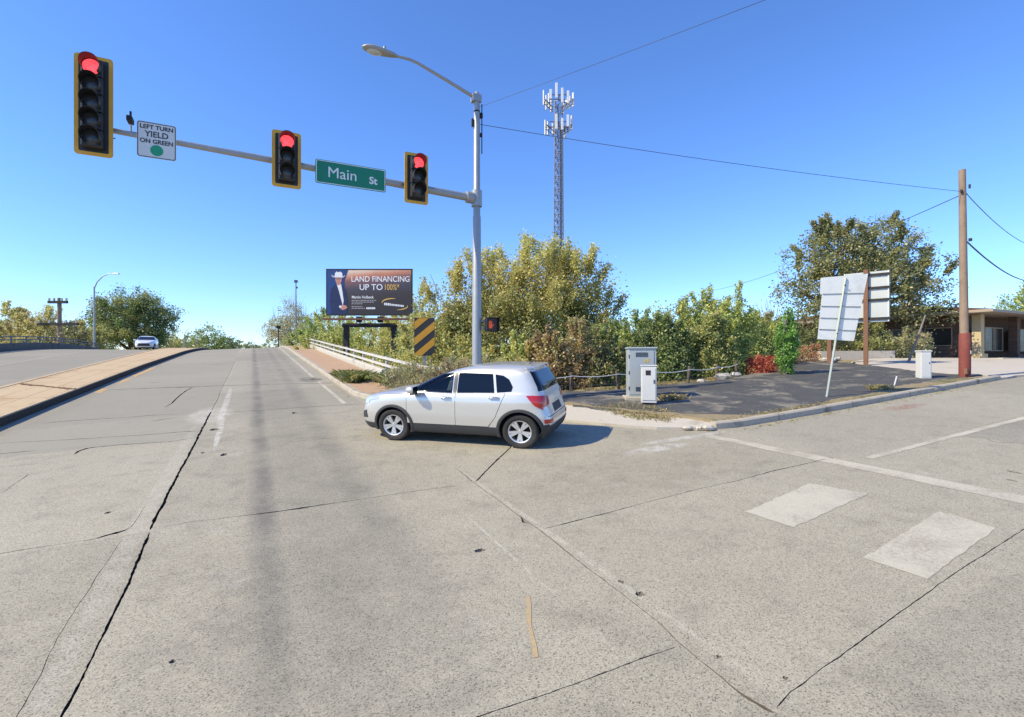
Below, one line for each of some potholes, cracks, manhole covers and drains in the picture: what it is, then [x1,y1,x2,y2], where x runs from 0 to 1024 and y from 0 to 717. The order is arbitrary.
crack [168,446,1024,717]
